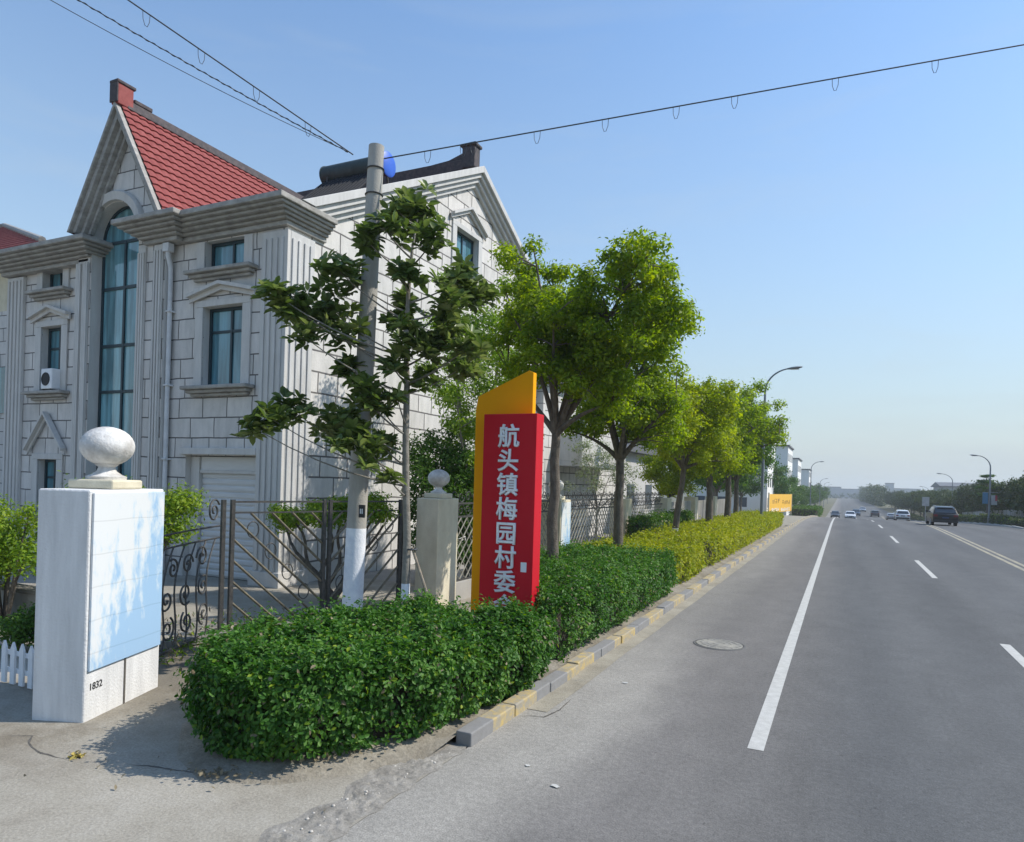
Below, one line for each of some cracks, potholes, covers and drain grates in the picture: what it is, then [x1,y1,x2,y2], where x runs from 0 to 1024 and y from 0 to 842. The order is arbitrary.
crack [7,735,64,759]
crack [129,764,191,772]
manhole cover [693,638,746,651]
